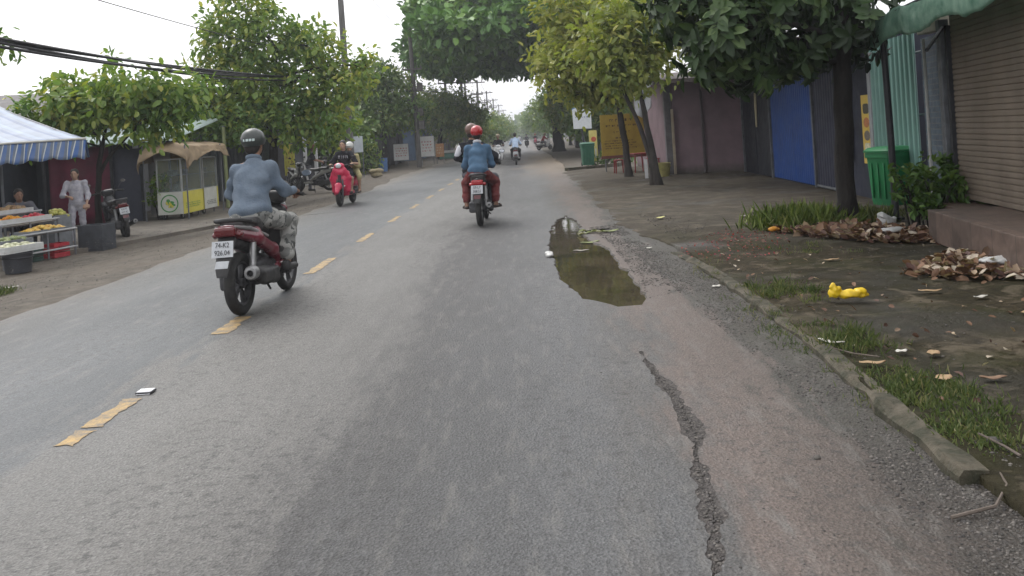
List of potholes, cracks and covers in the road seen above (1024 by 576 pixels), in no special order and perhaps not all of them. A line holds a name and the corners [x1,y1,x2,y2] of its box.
crack [639,351,730,576]
pothole [546,215,647,307]
